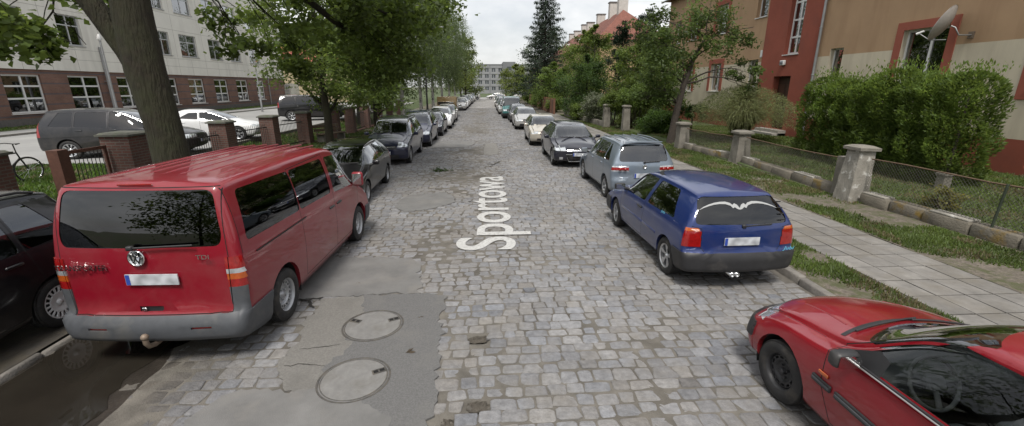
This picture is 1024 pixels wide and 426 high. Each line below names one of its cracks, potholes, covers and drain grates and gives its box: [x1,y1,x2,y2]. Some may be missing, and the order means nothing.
crack [299,297,323,308]
pothole [466,401,490,414]
manhole cover [341,310,404,342]
manhole cover [315,357,391,404]
pothole [468,335,489,344]
